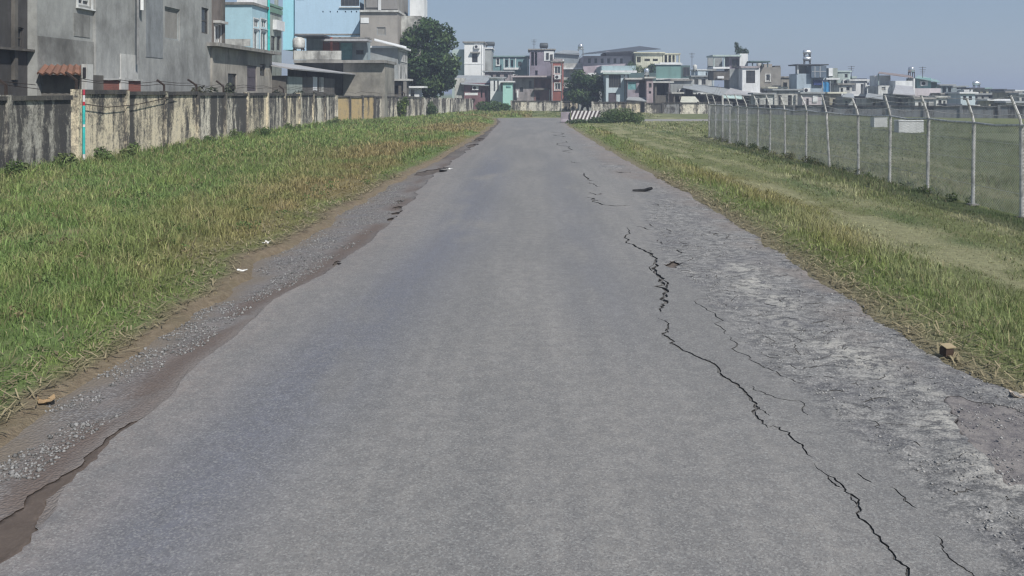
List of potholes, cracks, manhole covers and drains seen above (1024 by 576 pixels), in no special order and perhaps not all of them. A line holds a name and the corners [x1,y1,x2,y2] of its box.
crack [624,224,1010,576]
crack [555,132,630,206]
pothole [415,167,449,176]
